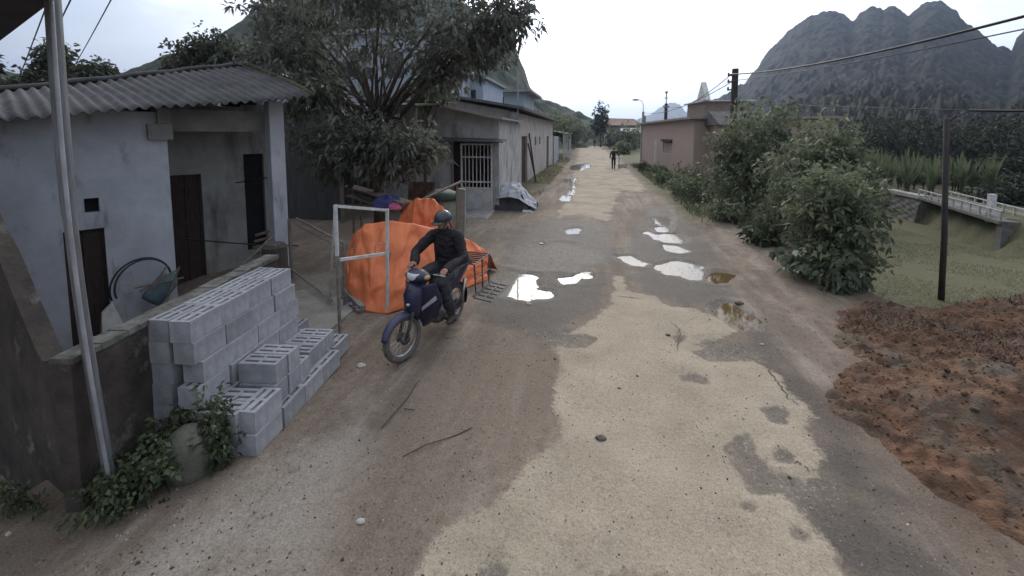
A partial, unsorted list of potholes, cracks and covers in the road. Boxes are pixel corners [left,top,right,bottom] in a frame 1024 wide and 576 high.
pothole [701,267,748,287]
pothole [699,297,781,337]
crack [754,359,799,406]
